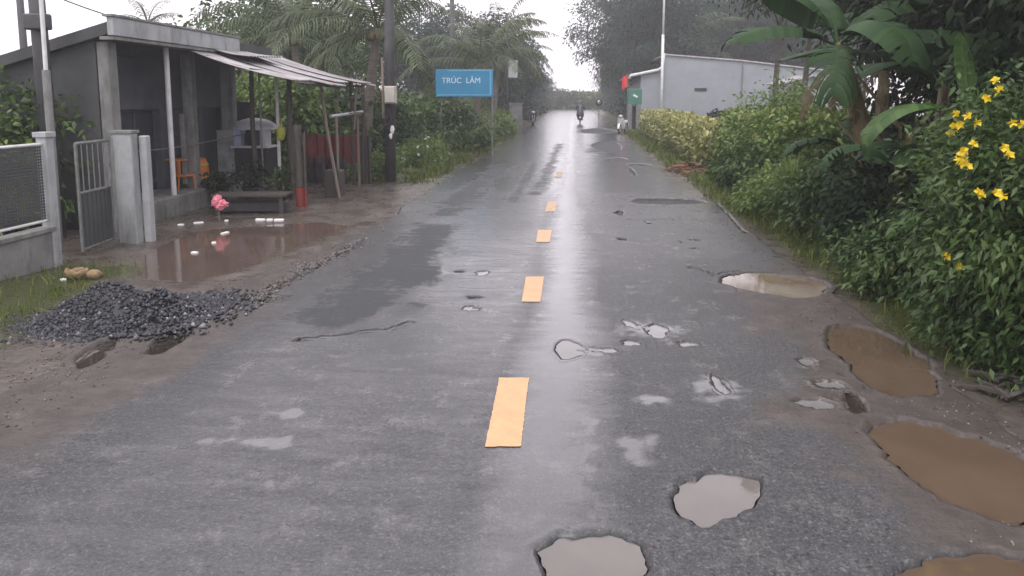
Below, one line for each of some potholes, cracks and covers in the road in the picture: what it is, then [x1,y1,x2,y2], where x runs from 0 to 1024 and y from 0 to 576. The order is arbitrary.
pothole [816,321,951,402]
pothole [804,377,861,393]
pothole [616,317,650,331]
pothole [834,387,878,419]
pothole [852,413,1024,533]
pothole [469,269,494,277]
pothole [781,394,849,413]
pothole [455,304,487,313]
pothole [658,464,777,537]
pothole [636,321,678,341]
